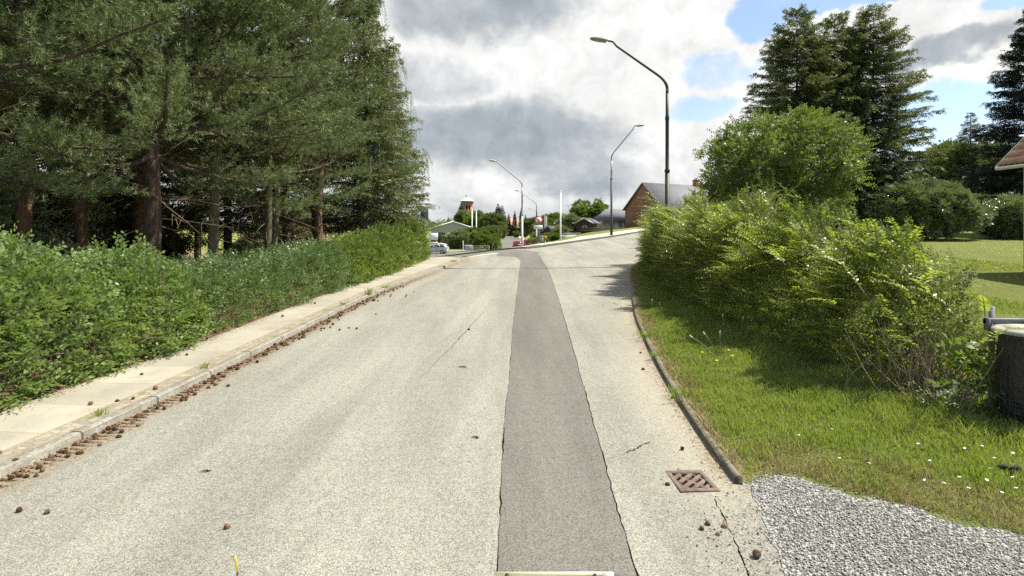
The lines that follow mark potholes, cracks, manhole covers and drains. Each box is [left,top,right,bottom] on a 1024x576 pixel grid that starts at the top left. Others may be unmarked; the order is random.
crack [548,270,650,576]
drain grate [665,470,721,500]
crack [715,500,749,576]
